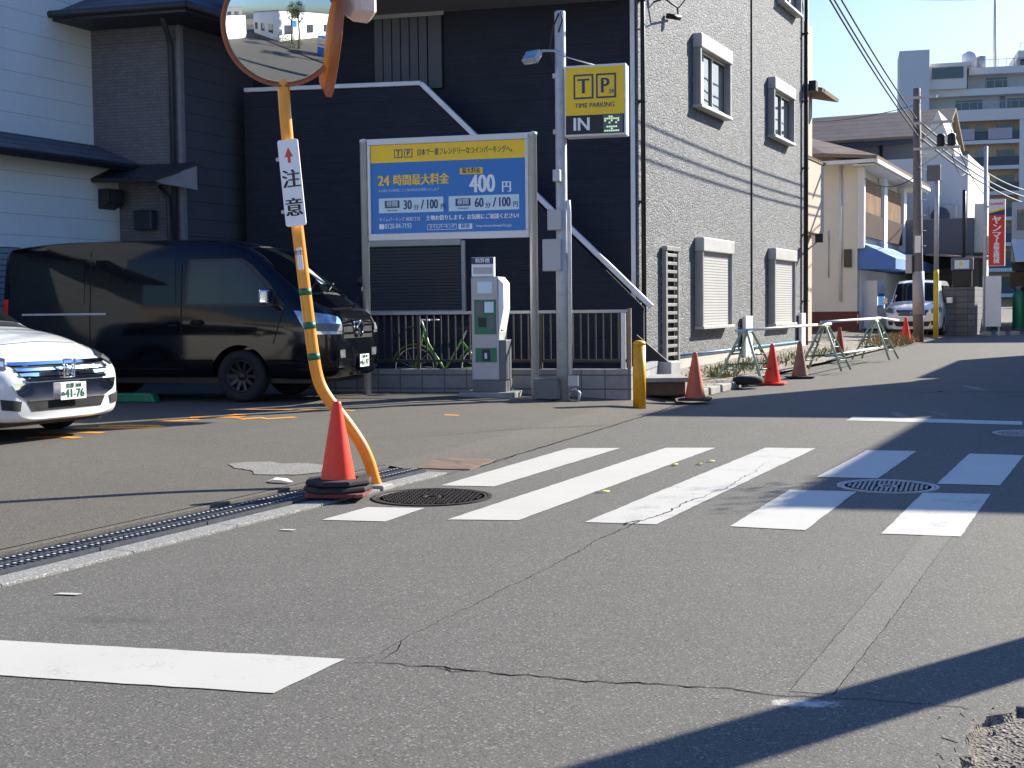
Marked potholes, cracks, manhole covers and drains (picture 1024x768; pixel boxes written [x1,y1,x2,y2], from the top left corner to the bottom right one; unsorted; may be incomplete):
manhole cover [837,479,940,494]
drain grate [259,488,318,504]
drain grate [58,519,207,551]
pothole [936,699,1024,768]
drain grate [168,498,294,525]
crack [354,472,970,710]
manhole cover [371,488,492,507]
drain grate [0,543,100,576]
